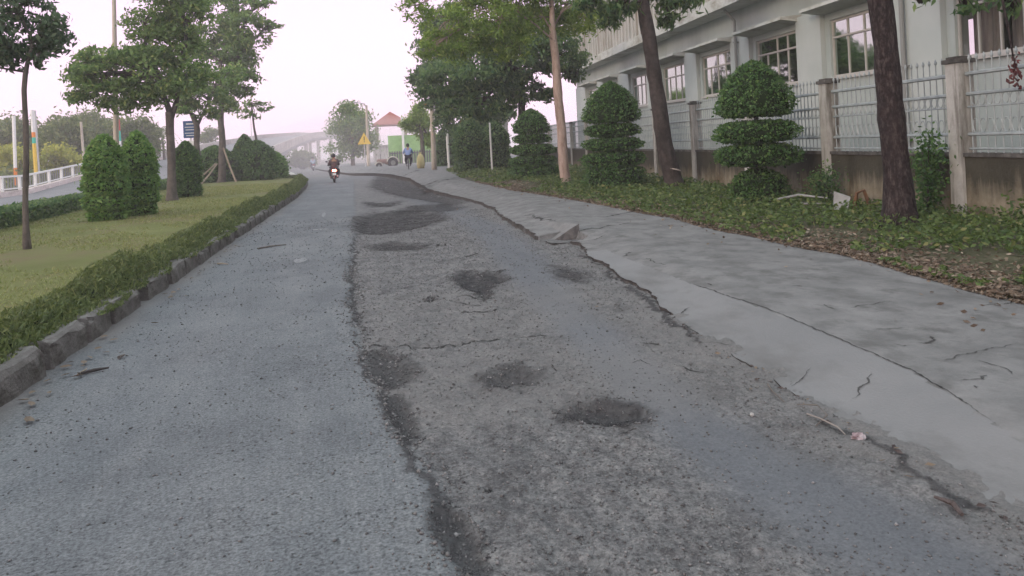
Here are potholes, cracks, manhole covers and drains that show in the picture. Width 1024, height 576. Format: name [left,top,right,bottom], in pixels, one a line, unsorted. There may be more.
pothole [483,365,540,387]
pothole [559,397,647,427]
crack [348,239,361,325]
pothole [451,270,510,300]
pothole [367,352,414,387]
crack [925,336,1012,388]
crack [352,339,499,538]
